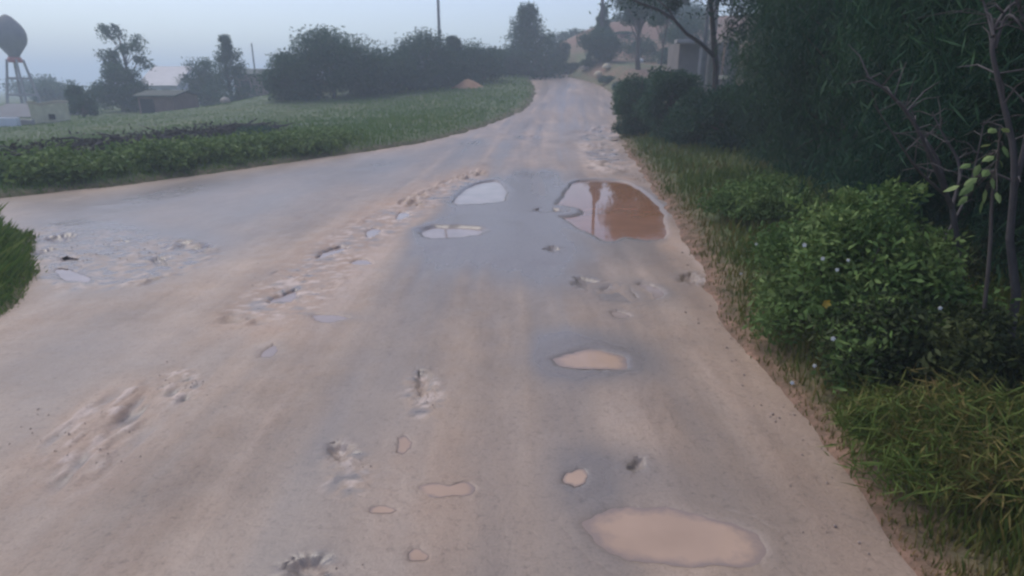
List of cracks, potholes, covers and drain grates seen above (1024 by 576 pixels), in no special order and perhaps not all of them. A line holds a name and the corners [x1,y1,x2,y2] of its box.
pothole [401,475,496,509]
pothole [68,241,134,259]
pothole [312,437,369,472]
pothole [31,245,81,260]
pothole [445,178,522,207]
pothole [334,255,386,268]
pothole [562,274,621,294]
